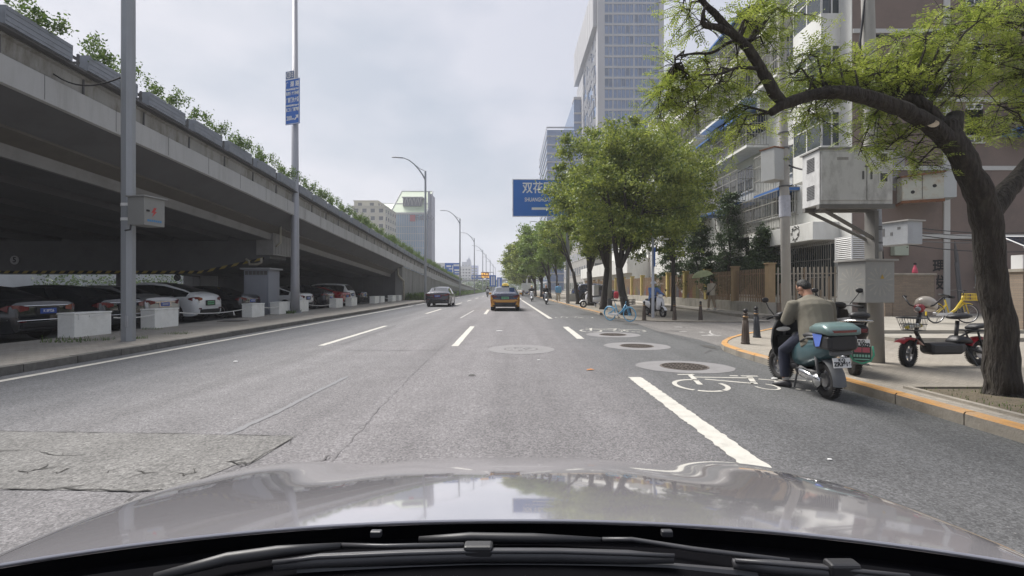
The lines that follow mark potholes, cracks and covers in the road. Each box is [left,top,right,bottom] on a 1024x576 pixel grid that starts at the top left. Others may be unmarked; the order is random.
crack [309,324,468,462]
manhole cover [636,361,735,373]
manhole cover [488,345,554,354]
crack [5,451,159,503]
crack [222,436,295,473]
manhole cover [604,342,671,350]
